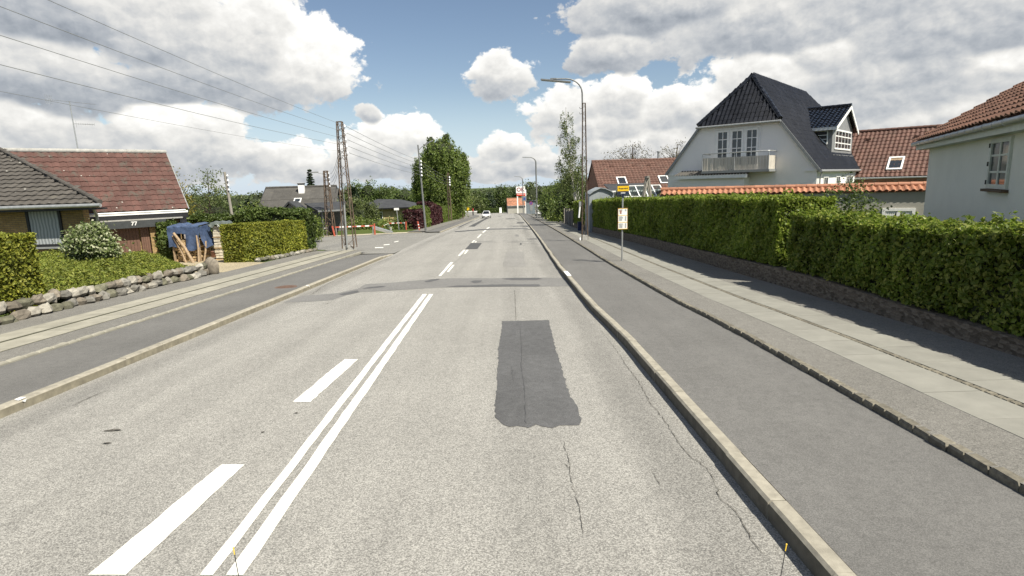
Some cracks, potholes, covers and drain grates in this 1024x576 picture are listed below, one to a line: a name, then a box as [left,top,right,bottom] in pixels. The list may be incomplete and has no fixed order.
crack [564,442,583,529]
crack [602,332,763,553]
crack [512,291,527,424]
